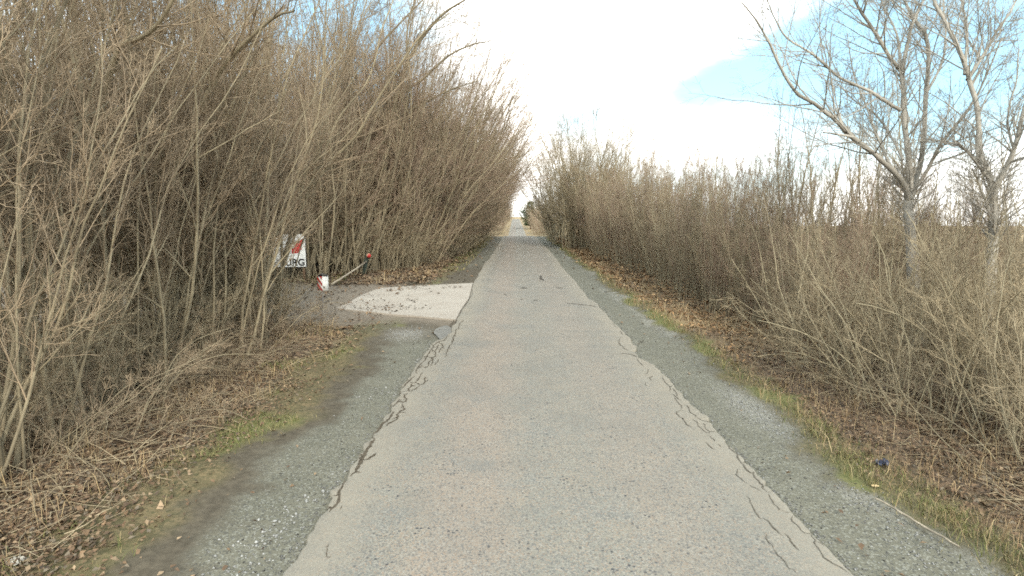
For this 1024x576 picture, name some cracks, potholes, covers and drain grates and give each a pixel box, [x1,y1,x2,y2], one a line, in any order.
crack [615,326,849,573]
crack [328,319,464,511]
